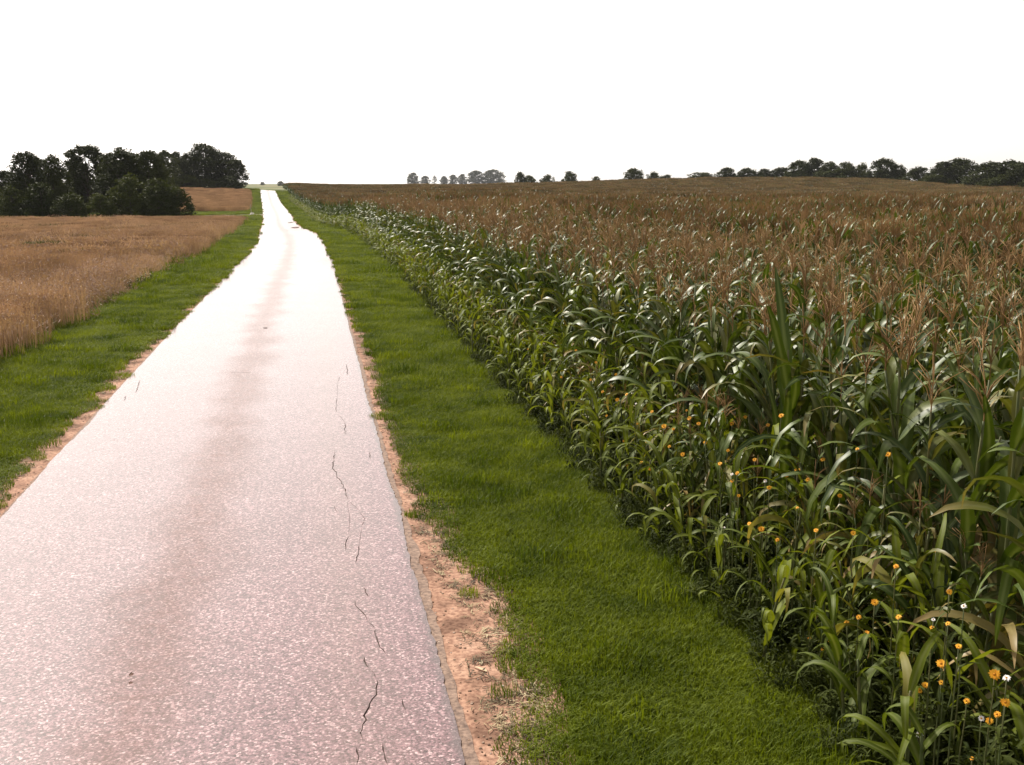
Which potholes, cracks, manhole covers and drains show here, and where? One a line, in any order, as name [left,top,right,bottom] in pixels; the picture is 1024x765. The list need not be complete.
crack [355,588,388,765]
crack [332,453,364,563]
